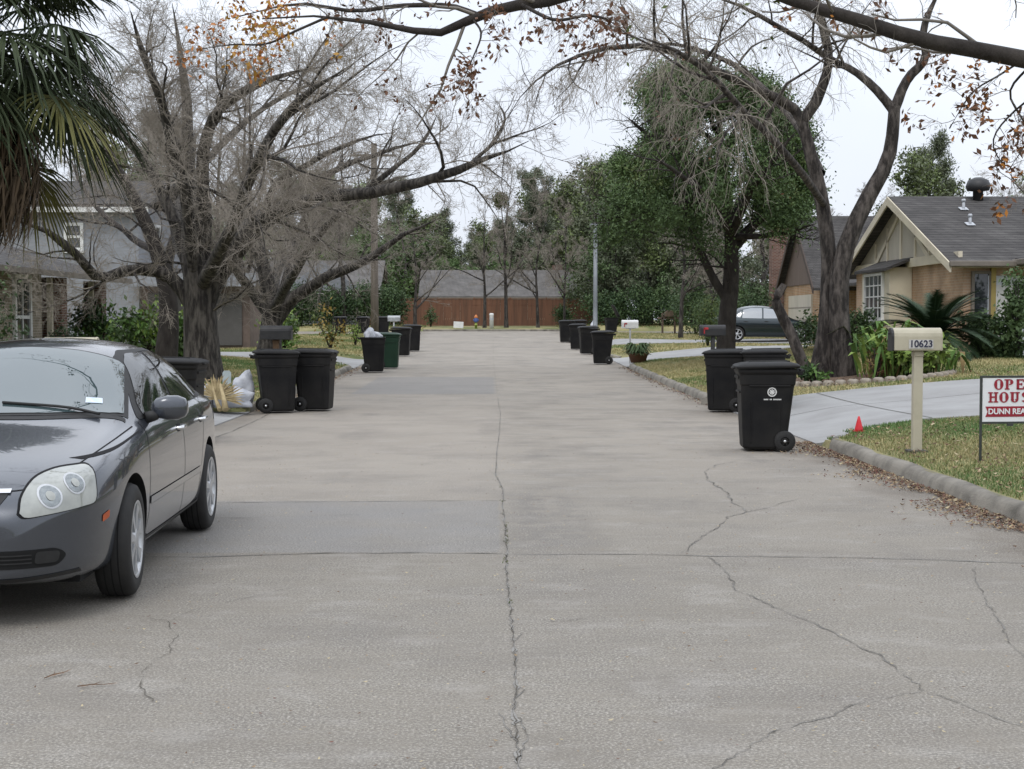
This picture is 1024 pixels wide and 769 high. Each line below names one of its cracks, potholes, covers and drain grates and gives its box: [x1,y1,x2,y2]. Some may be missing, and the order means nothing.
crack [493,358,529,769]
crack [681,462,1022,769]
crack [139,579,324,700]
